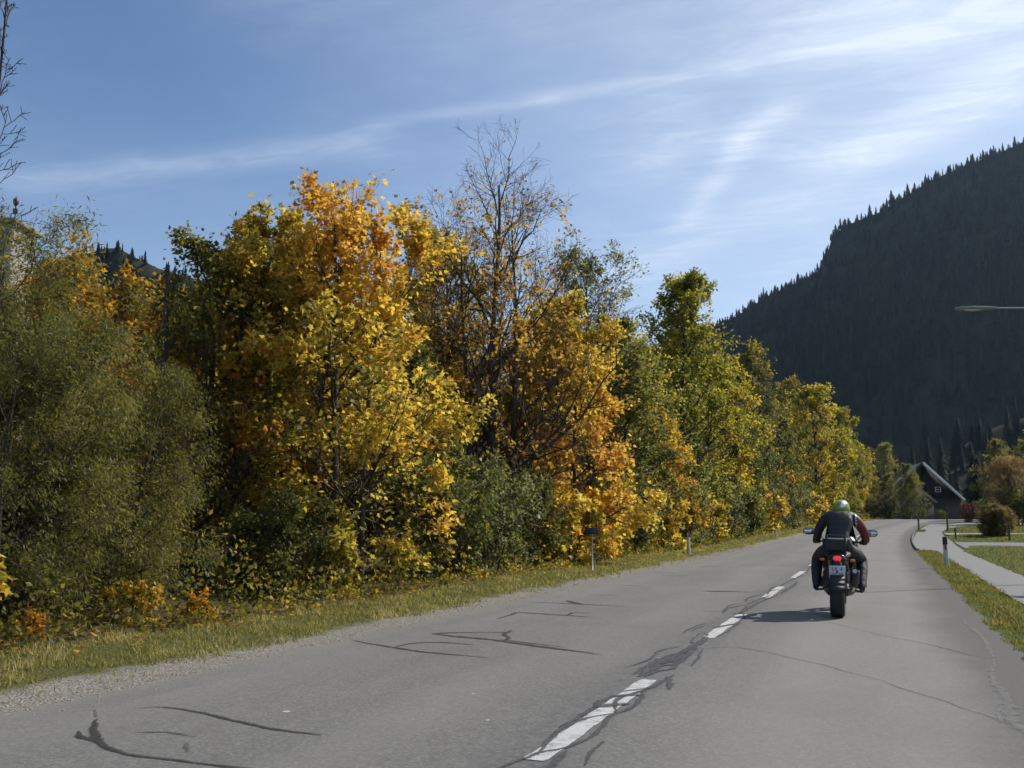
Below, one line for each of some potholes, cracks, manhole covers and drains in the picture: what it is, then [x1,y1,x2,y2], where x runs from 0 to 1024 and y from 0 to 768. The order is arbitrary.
crack [499,566,1015,768]
